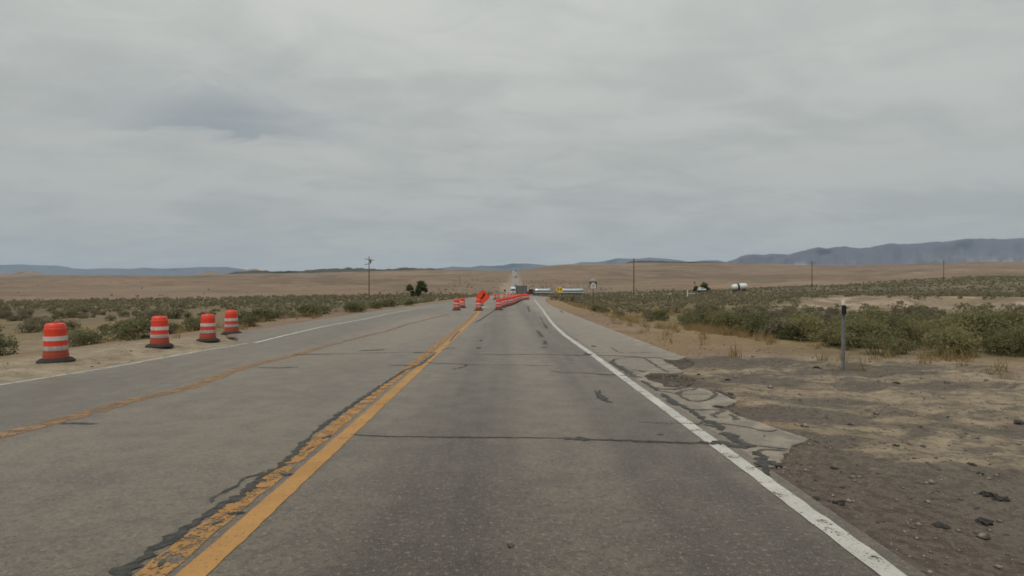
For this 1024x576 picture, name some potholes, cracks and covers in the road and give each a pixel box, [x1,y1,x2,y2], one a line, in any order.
pothole [647,375,694,387]
